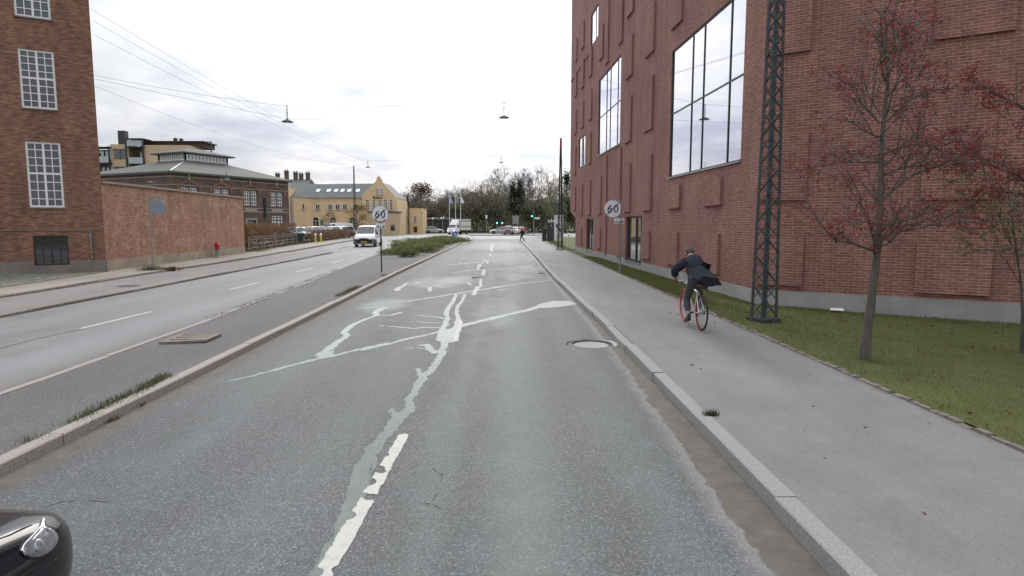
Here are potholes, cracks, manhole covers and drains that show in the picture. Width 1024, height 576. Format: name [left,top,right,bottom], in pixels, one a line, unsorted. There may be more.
manhole cover [571,340,612,348]
